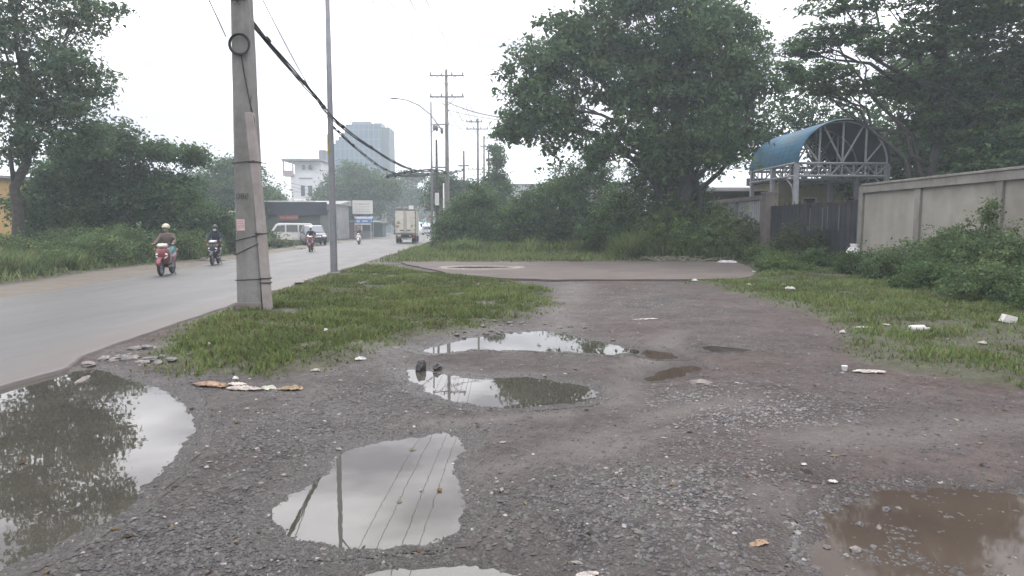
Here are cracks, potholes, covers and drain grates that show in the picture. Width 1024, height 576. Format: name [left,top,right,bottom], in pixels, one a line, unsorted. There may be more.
pothole [625,360,716,383]
pothole [781,469,1024,576]
pothole [0,364,218,576]
pothole [403,328,639,357]
pothole [632,345,697,361]
pothole [239,423,498,562]
pothole [682,341,775,353]
pothole [390,364,618,412]
